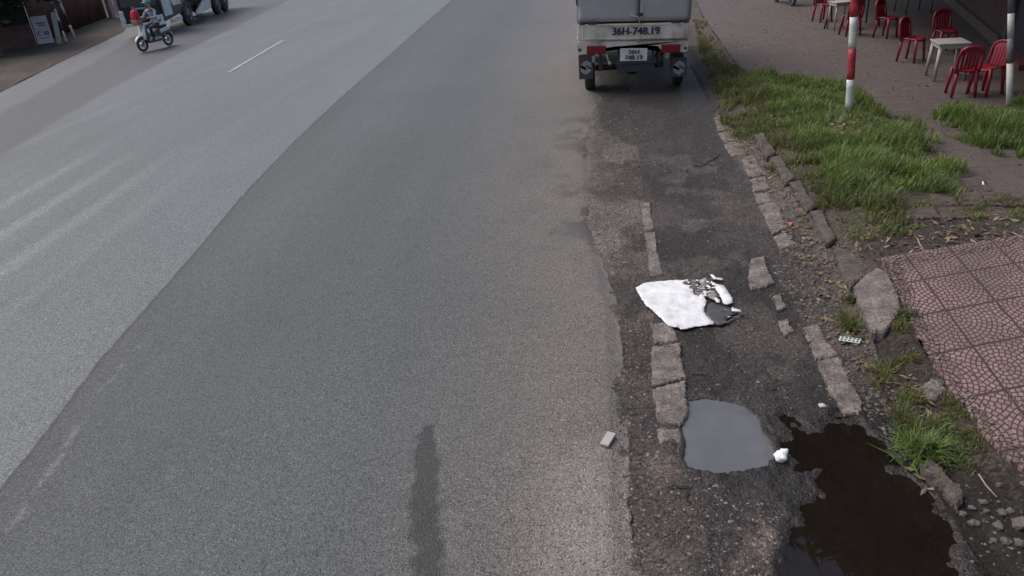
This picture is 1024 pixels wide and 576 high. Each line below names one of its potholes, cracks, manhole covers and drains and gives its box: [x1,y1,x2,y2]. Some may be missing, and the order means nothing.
pothole [675,395,780,477]
